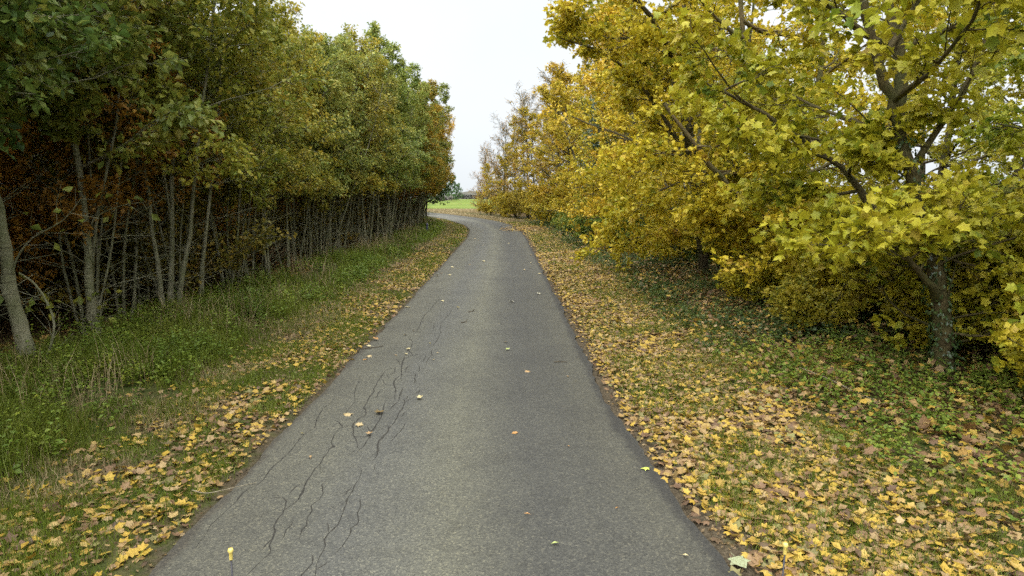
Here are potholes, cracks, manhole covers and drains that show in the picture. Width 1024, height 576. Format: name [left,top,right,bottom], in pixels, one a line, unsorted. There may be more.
crack [195,304,451,576]
